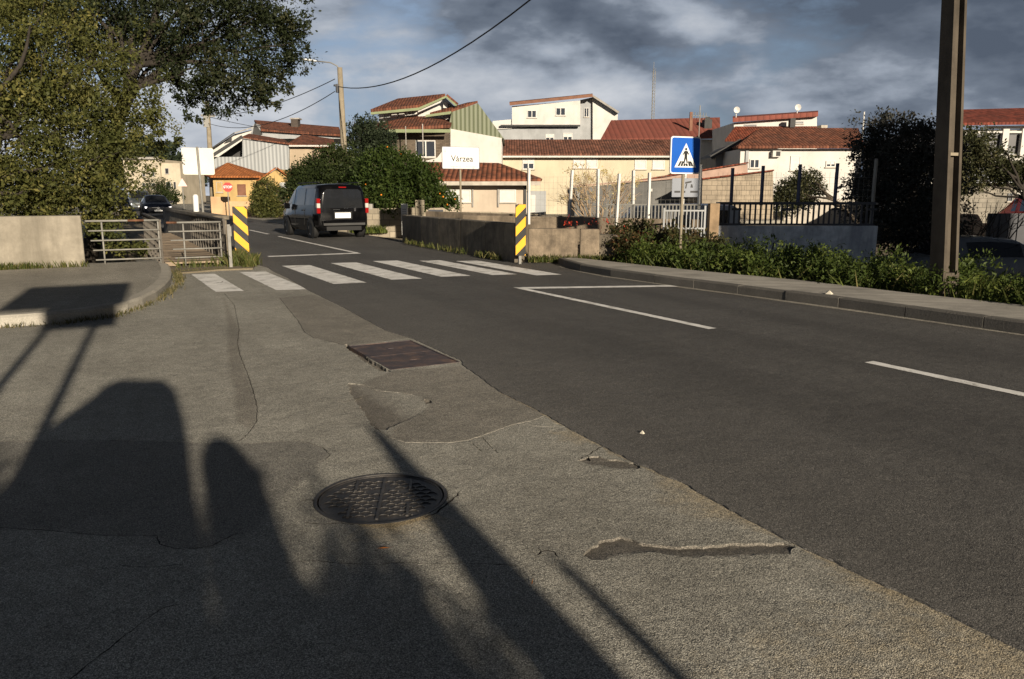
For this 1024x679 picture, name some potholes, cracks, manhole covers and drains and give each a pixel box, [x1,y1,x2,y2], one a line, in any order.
crack [70,604,179,679]
pothole [583,536,796,560]
manhole cover [313,473,448,524]
crack [377,416,548,453]
pothole [578,456,640,470]
manhole cover [348,340,460,370]
